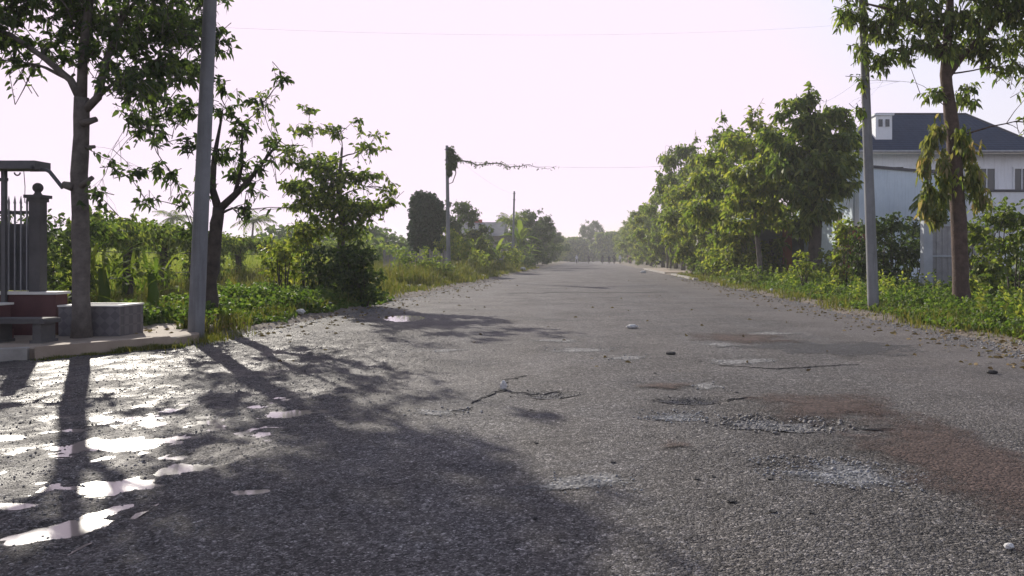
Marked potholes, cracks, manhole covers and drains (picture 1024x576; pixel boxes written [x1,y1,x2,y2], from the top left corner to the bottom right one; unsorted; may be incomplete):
pothole [748,454,946,493]
crack [450,375,553,415]
pothole [633,408,722,423]
pothole [703,413,856,434]
pothole [660,396,737,406]
